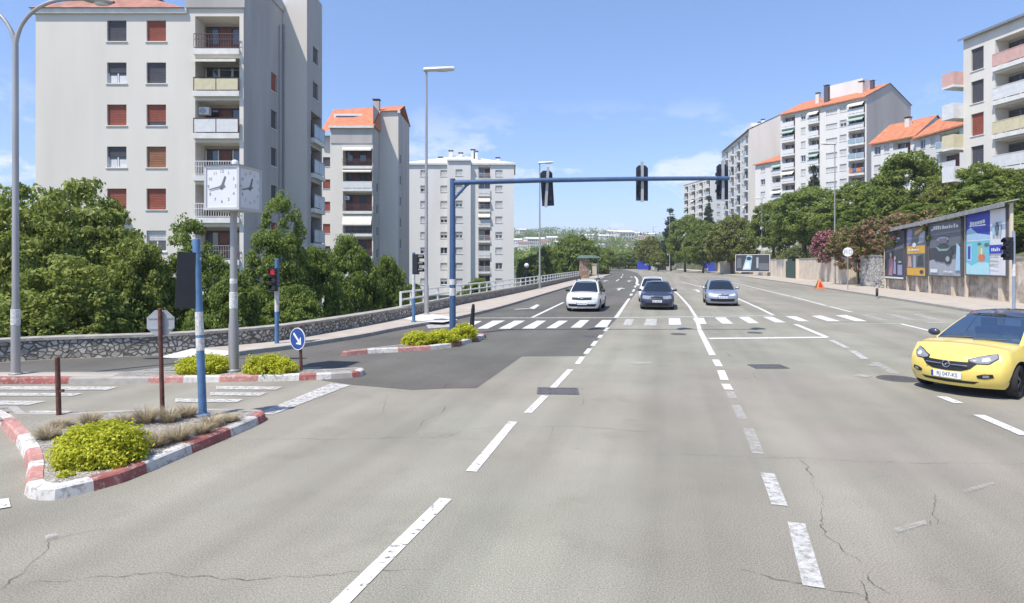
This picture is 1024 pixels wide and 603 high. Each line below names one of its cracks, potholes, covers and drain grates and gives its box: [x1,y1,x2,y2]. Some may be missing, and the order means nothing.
manhole cover [537,387,579,395]
crack [9,529,337,582]
crack [574,448,1013,603]
